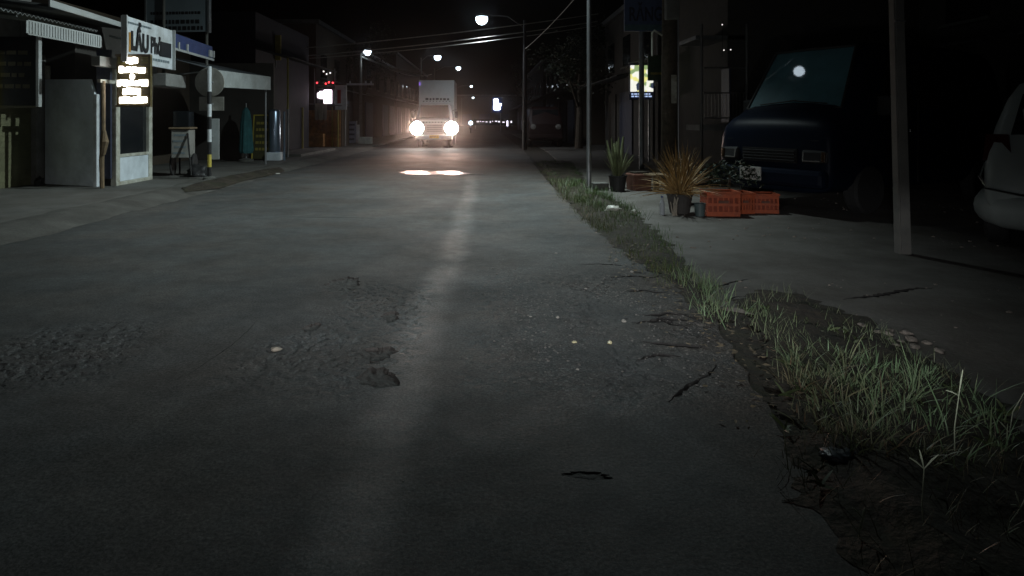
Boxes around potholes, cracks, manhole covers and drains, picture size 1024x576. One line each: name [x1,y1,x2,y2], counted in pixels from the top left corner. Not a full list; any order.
crack [631,312,717,402]
pothole [356,366,400,389]
pothole [381,311,399,323]
pothole [561,471,613,481]
pothole [360,346,399,363]
crack [843,287,932,300]
